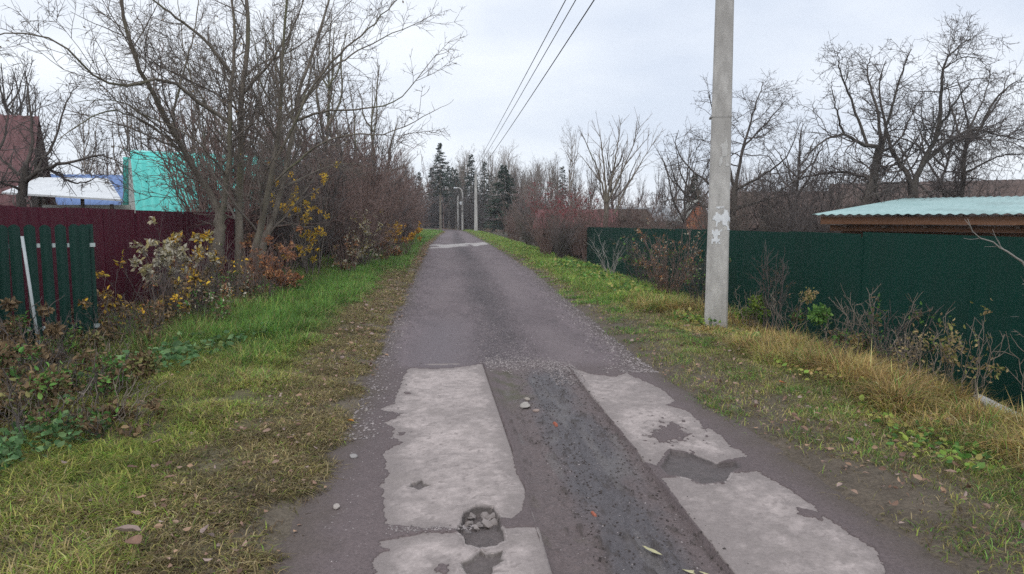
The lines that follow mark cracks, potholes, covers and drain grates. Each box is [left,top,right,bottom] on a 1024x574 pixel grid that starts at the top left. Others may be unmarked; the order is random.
pothole [659,449,742,486]
pothole [452,504,507,552]
